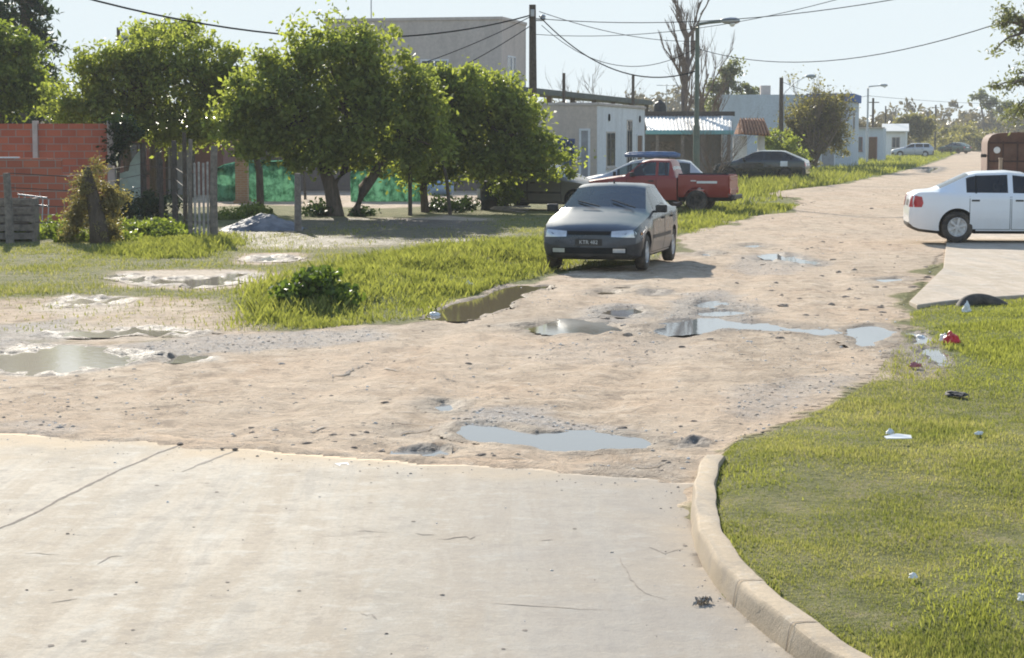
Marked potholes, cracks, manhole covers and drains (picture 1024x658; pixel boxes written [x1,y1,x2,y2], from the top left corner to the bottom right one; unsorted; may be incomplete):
pothole [486,315,652,338]
pothole [100,271,265,289]
pothole [831,322,906,349]
pothole [0,343,184,377]
pothole [390,443,454,458]
pothole [411,396,476,414]
pothole [677,308,768,318]
pothole [604,316,849,339]
pothole [28,325,224,340]
crack [620,547,683,600]
pothole [418,284,555,324]
